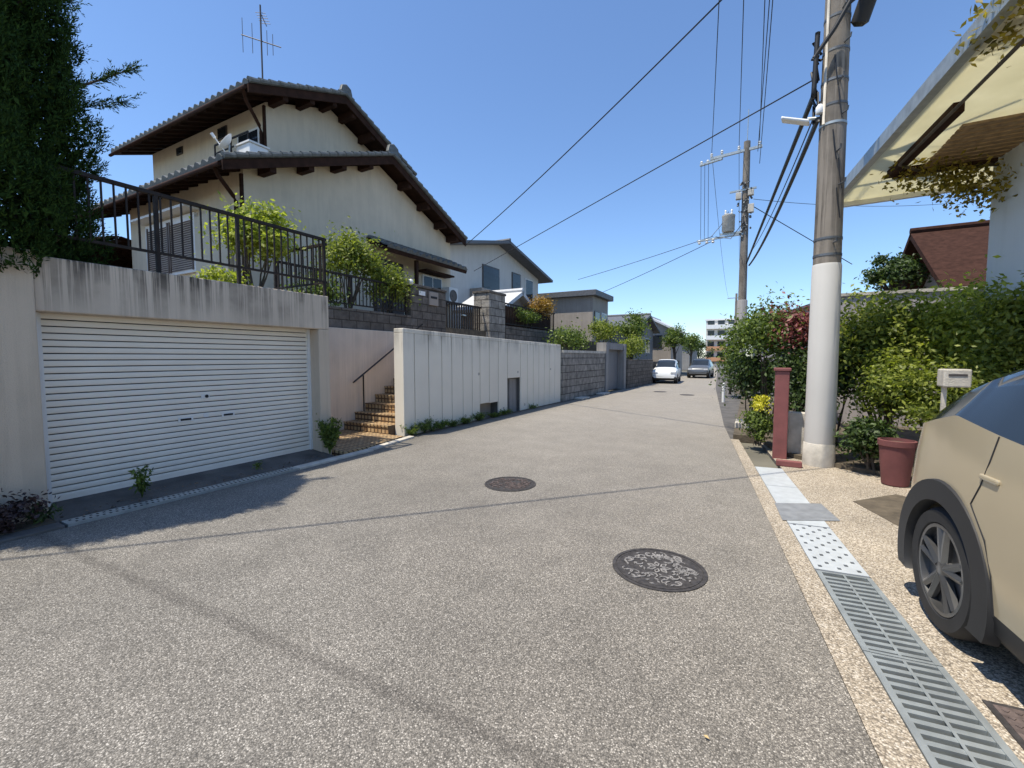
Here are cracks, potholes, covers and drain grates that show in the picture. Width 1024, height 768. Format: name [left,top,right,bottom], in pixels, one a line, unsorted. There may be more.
drain grate [863,651,1024,768]
manhole cover [982,699,1024,750]
manhole cover [484,476,536,492]
manhole cover [612,548,708,593]
drain grate [816,570,943,667]
